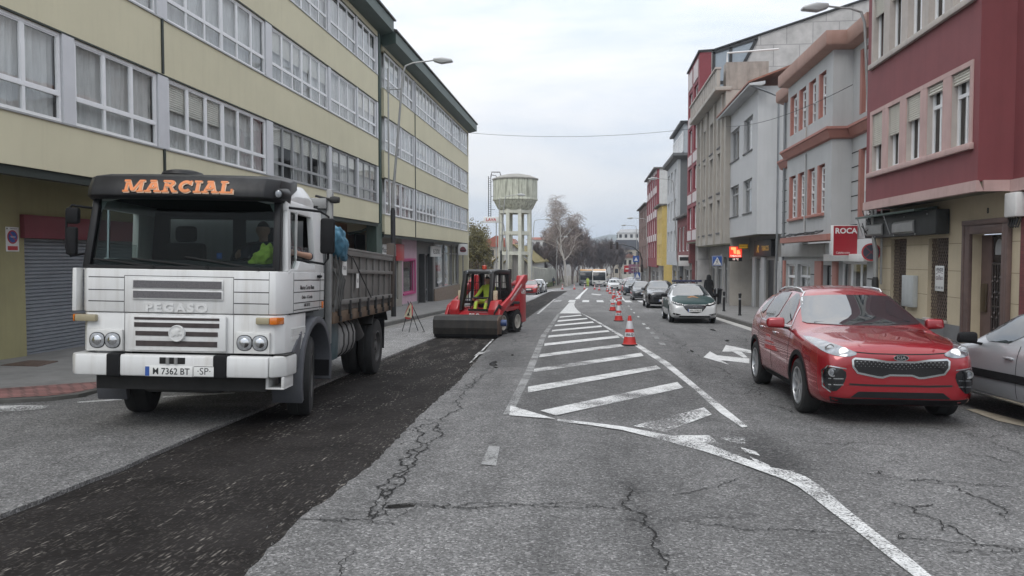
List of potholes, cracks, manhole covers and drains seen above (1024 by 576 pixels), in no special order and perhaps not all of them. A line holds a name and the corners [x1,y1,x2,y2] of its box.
crack [805,440,1008,518]
crack [886,502,1021,553]
crack [296,320,631,525]
